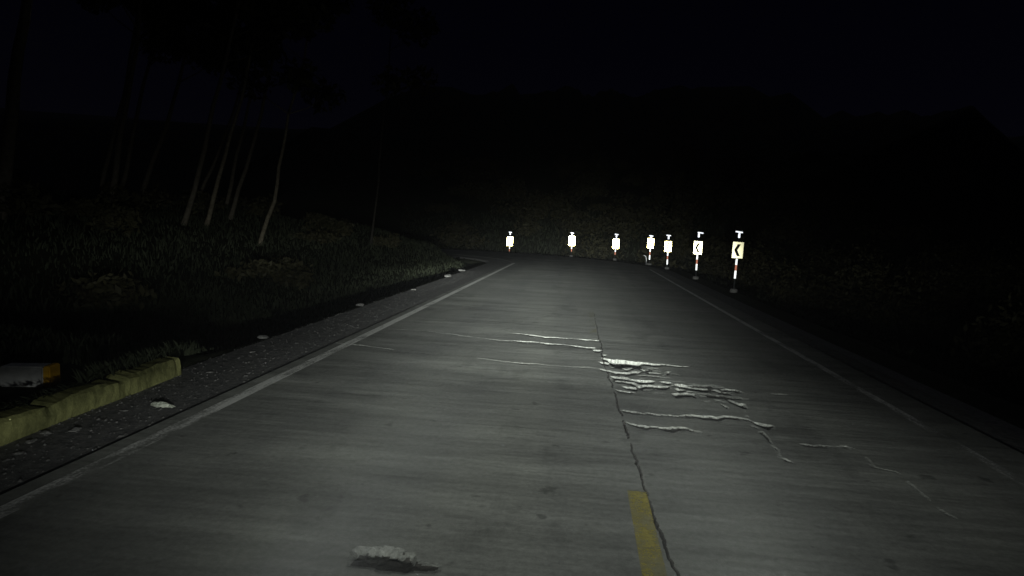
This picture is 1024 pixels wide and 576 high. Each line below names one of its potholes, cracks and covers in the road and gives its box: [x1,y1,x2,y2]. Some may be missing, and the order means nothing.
crack [396,314,958,576]
pothole [346,545,443,575]
